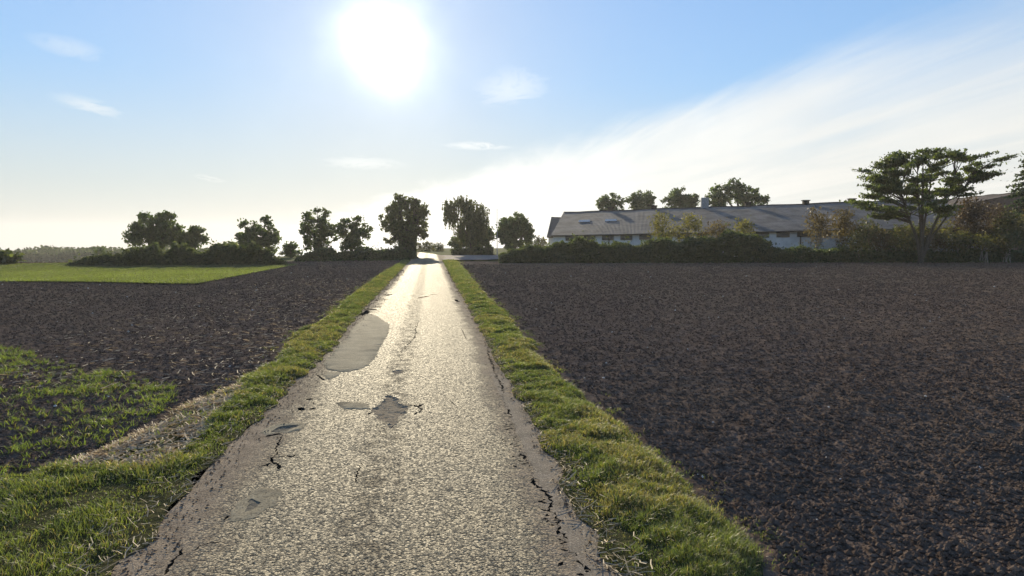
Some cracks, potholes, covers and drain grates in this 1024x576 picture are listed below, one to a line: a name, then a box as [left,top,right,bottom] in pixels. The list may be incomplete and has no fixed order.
crack [484,348,591,576]
pothole [271,425,299,433]
crack [259,433,296,469]
pothole [371,394,408,429]
crack [164,542,219,575]
